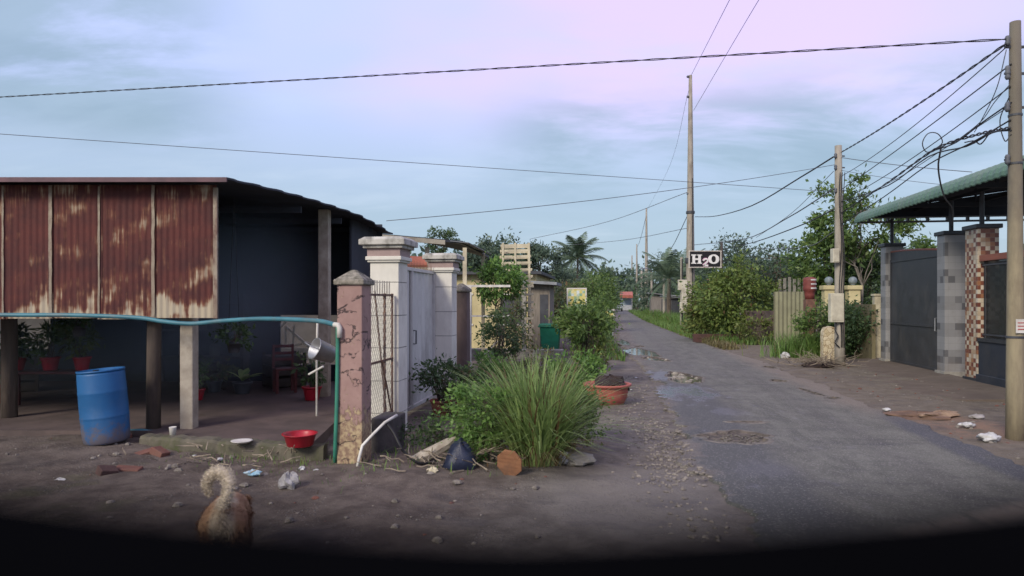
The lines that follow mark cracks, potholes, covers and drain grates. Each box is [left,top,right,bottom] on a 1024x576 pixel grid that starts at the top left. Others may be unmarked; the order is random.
pothole [621,347,662,357]
pothole [664,371,706,384]
pothole [691,429,775,445]
